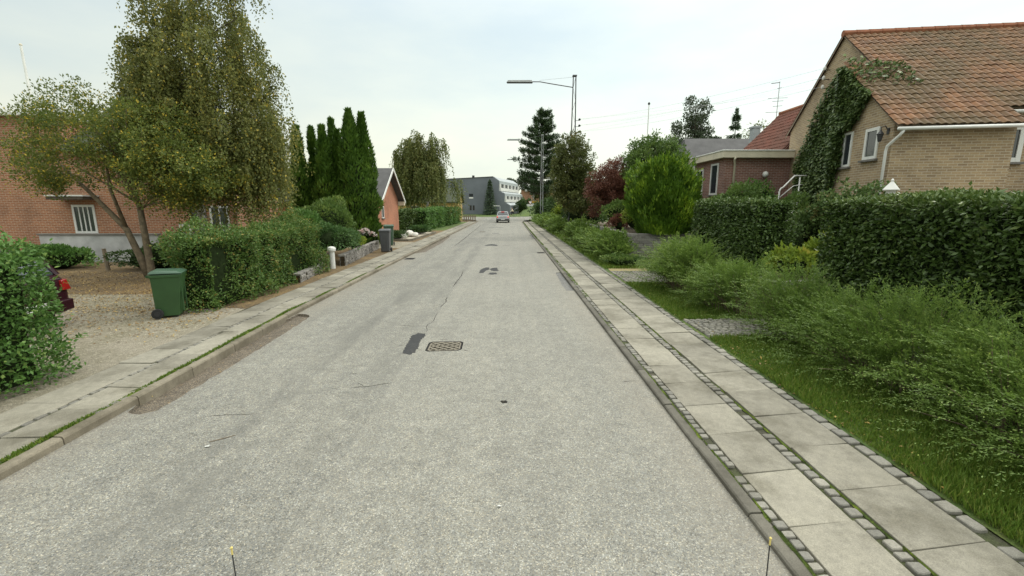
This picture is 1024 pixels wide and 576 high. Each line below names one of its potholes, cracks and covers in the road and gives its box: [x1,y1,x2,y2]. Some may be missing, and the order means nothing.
manhole cover [425,341,463,352]
